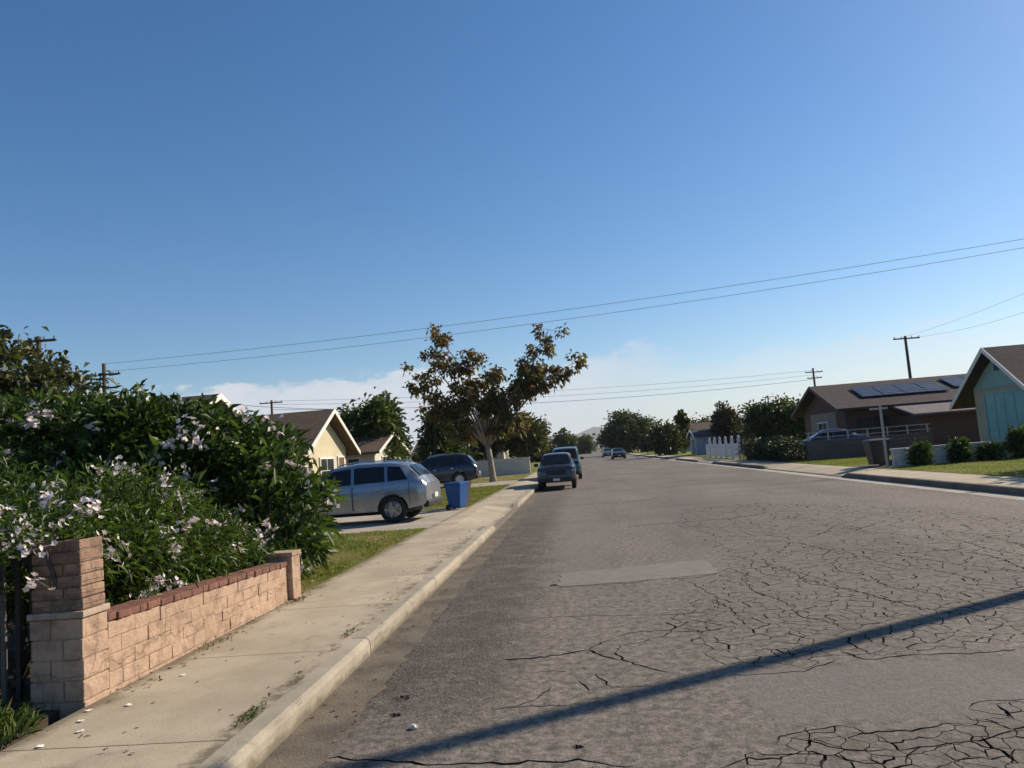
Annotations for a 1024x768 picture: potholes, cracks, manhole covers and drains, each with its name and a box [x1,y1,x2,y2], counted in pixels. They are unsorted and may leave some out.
crack [500,502,1024,709]
crack [327,756,630,767]
crack [721,699,1024,768]
